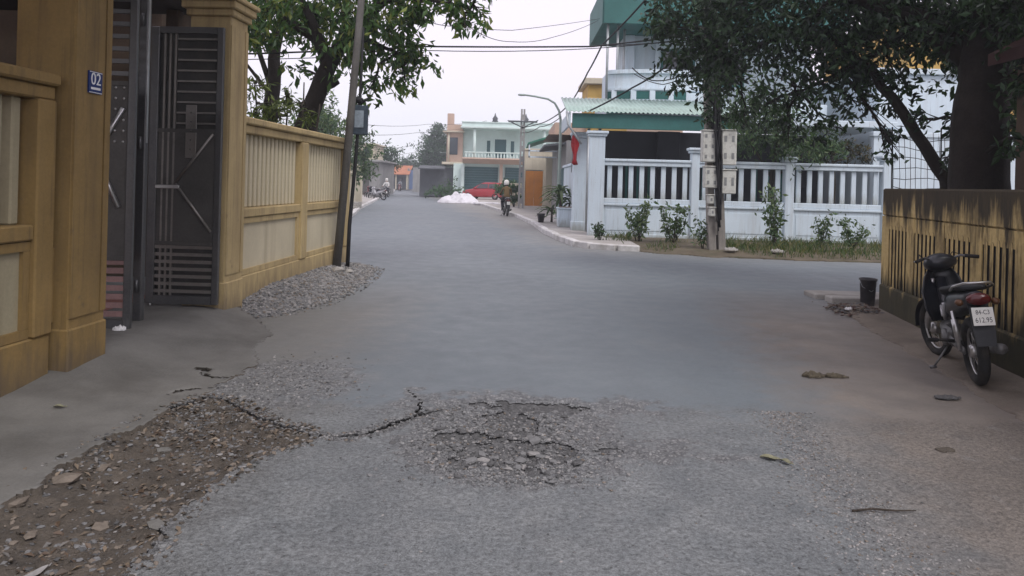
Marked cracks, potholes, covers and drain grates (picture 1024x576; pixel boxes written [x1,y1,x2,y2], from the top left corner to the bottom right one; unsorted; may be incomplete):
pothole [0,396,311,576]
pothole [432,400,624,476]
crack [318,390,447,437]
